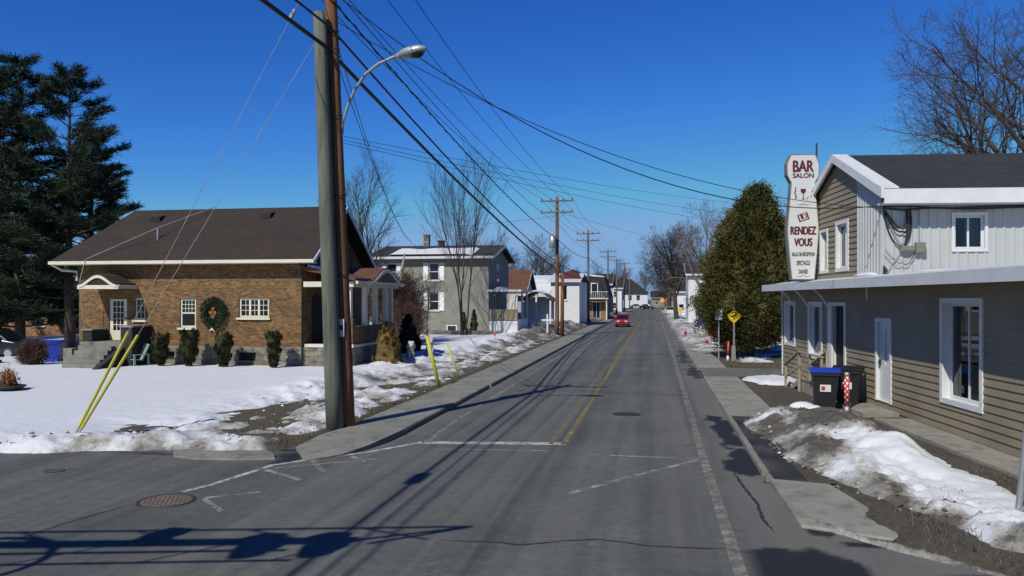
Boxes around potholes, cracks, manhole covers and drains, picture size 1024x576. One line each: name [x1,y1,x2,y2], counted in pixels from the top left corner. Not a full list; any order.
manhole cover [135,494,197,508]
crack [445,472,774,553]
